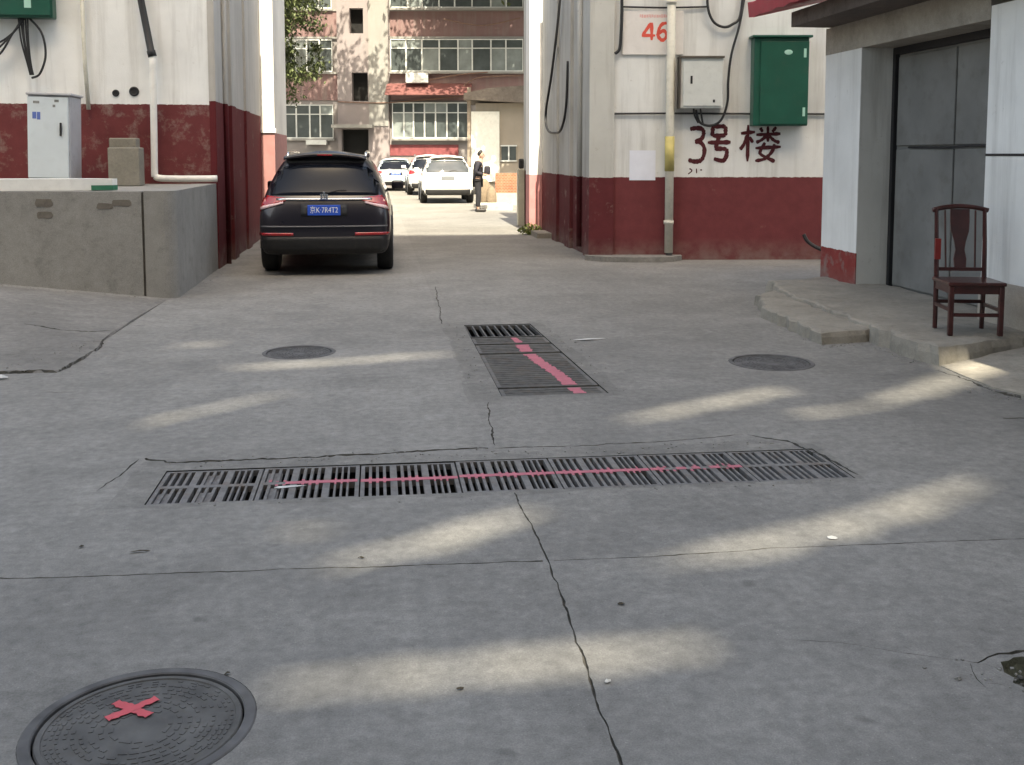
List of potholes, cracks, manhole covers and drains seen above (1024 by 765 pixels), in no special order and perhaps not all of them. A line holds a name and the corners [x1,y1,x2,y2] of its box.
drain grate [480,353,598,390]
manhole cover [262,345,336,359]
crack [786,639,1024,686]
manhole cover [16,668,257,765]
drain grate [465,324,543,339]
manhole cover [729,354,815,371]
drain grate [475,344,560,355]
drain grate [146,469,264,505]
drain grate [548,455,662,489]
drain grate [360,463,462,497]
drain grate [455,459,563,493]
drain grate [499,386,607,396]
